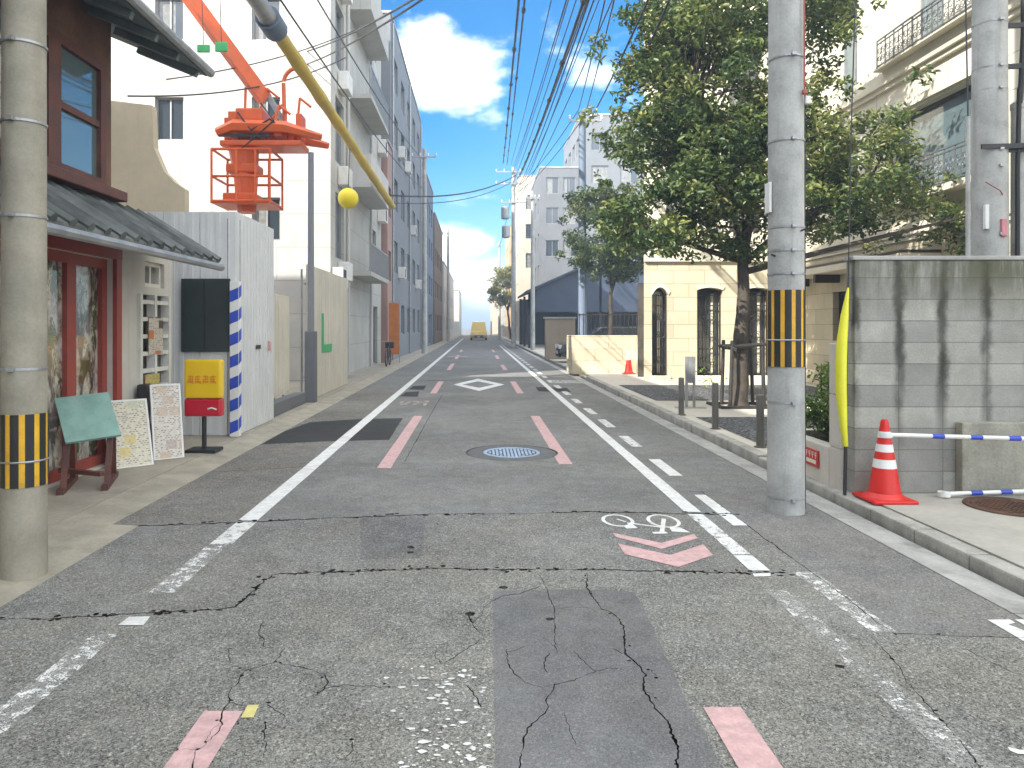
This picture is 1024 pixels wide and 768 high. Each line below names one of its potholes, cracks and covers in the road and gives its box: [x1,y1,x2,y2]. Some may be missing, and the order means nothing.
crack [0,565,794,768]
crack [134,491,1019,768]
manhole cover [466,445,558,461]
manhole cover [962,496,1024,517]
